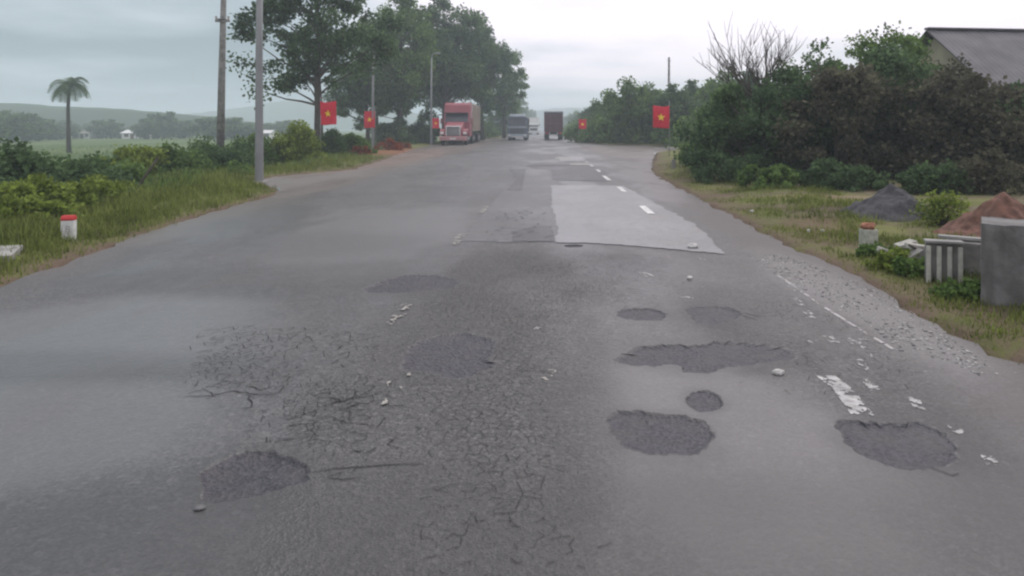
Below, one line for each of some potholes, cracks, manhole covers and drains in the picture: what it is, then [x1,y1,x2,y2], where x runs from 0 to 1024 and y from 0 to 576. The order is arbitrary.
crack [180,325,423,479]
pothole [613,340,800,374]
pothole [398,331,499,380]
pothole [685,390,724,412]
pothole [684,305,743,325]
pothole [616,308,668,321]
pothole [603,409,717,456]
pothole [833,419,961,471]
pothole [361,274,463,293]
pothole [198,449,313,504]
